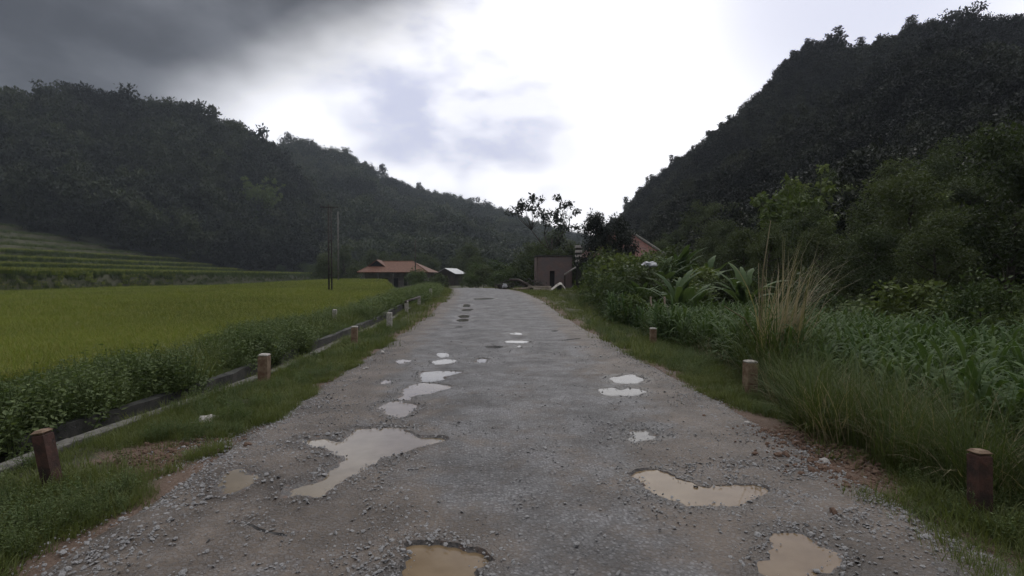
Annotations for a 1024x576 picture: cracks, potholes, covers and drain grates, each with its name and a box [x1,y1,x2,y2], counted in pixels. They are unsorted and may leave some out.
pothole [598,387,648,396]
pothole [399,540,495,576]
pothole [610,374,645,384]
pothole [280,427,449,498]
pothole [417,370,464,382]
pothole [623,429,660,442]
pothole [213,467,263,495]
pothole [393,383,457,400]
pothole [375,401,419,418]
pothole [755,530,847,576]
pothole [629,468,770,507]
